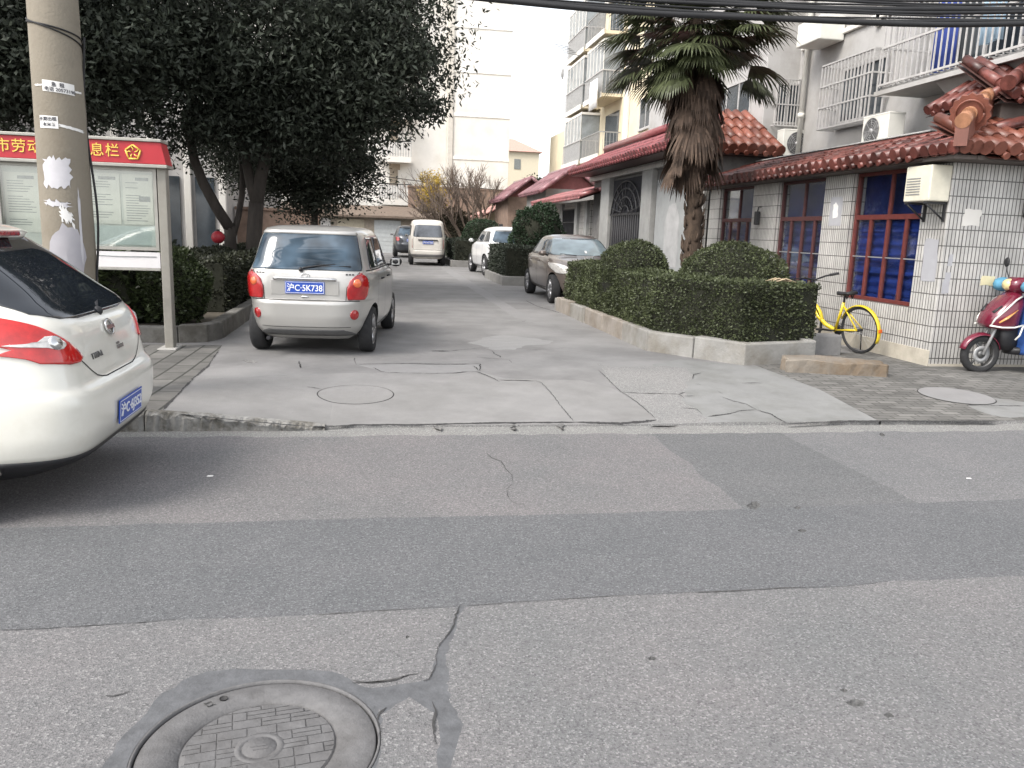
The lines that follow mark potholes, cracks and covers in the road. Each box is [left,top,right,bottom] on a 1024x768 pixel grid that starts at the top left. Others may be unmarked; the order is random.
manhole cover [917,387,997,405]
manhole cover [127,679,381,768]
crack [375,348,500,381]
manhole cover [317,385,394,404]
crack [352,673,417,683]
crack [631,373,789,424]
